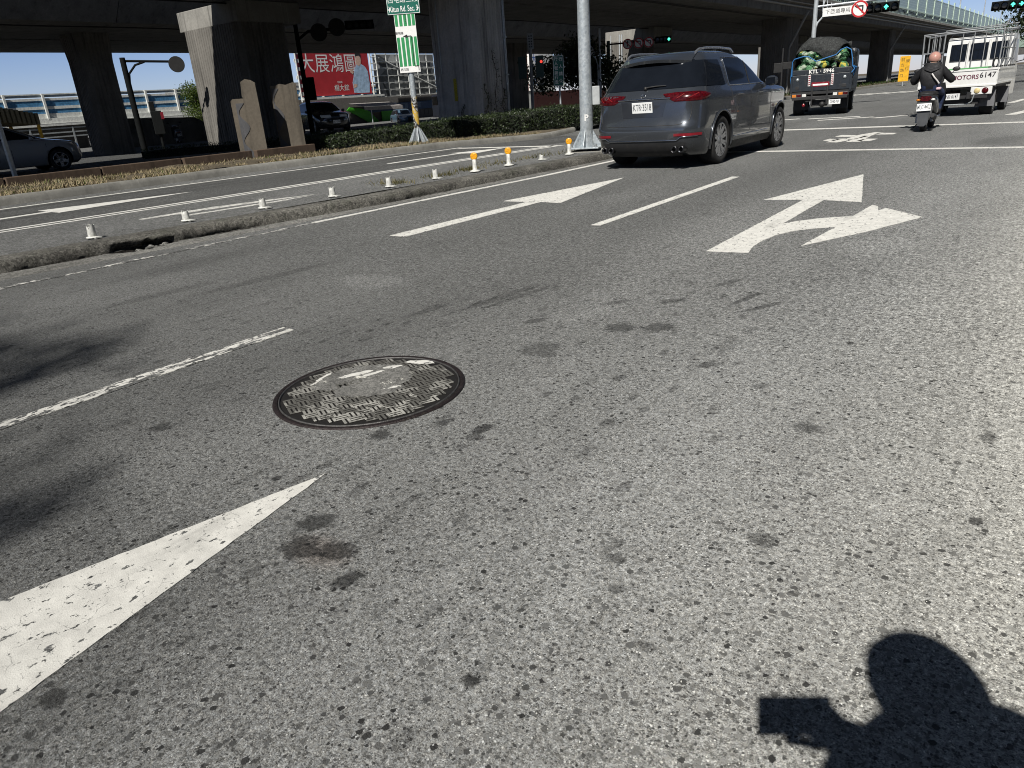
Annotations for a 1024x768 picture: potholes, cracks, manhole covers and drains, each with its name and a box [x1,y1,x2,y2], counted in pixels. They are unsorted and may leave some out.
manhole cover [272,356,465,430]
pothole [109,241,178,254]
